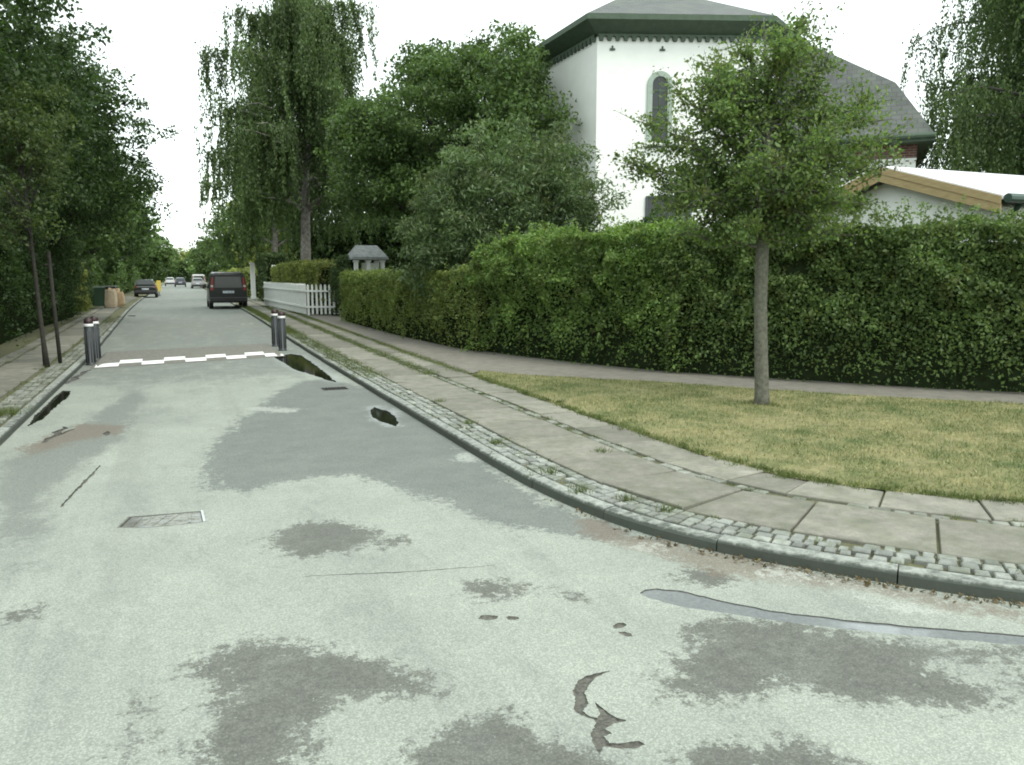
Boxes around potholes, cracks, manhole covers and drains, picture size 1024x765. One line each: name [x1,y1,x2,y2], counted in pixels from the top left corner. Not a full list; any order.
crack [304,565,492,577]
crack [61,465,100,507]
crack [572,670,645,754]
